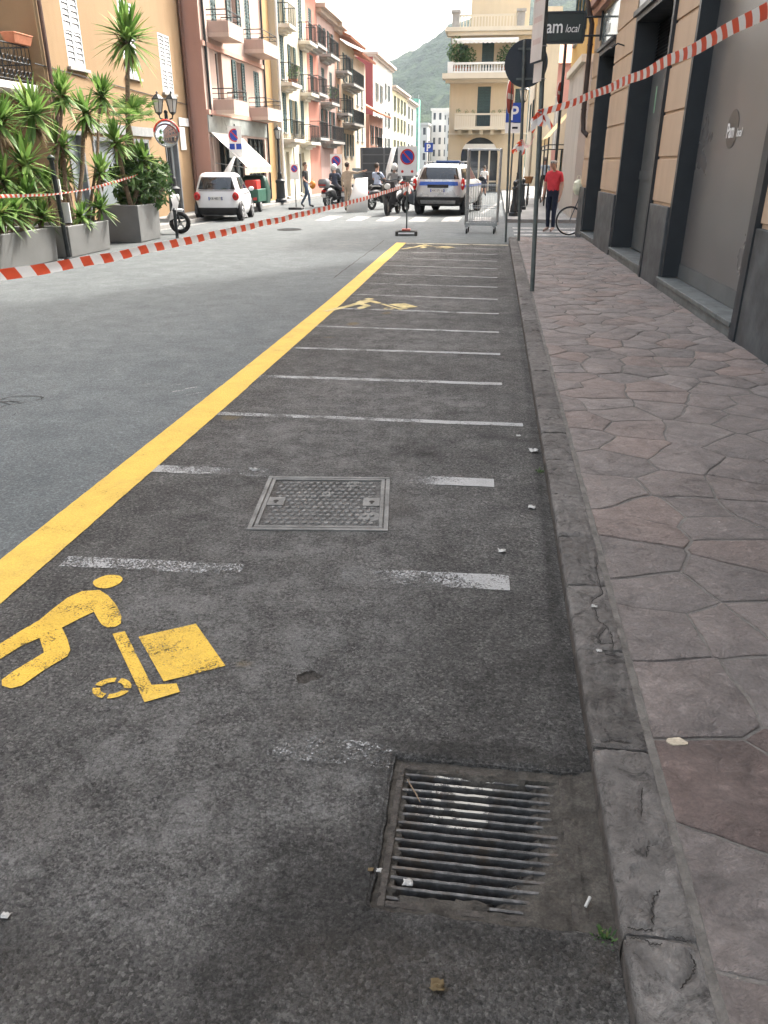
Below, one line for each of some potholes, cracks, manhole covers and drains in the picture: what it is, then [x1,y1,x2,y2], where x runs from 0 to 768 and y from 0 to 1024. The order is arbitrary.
pothole [296,670,323,684]
manhole cover [246,476,390,532]
crack [591,562,619,657]
drain grate [370,759,618,946]
crack [627,927,696,989]
